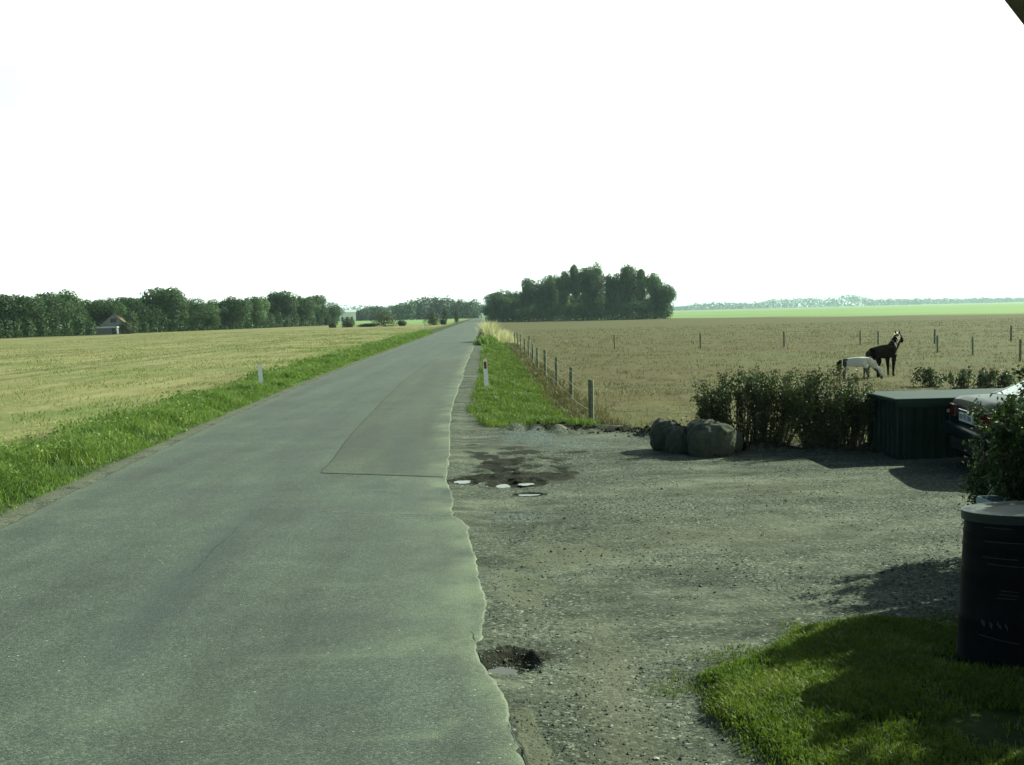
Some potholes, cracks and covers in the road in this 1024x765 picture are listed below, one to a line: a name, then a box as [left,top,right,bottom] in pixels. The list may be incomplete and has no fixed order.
pothole [478,643,548,678]
pothole [447,476,487,486]
pothole [477,476,552,489]
